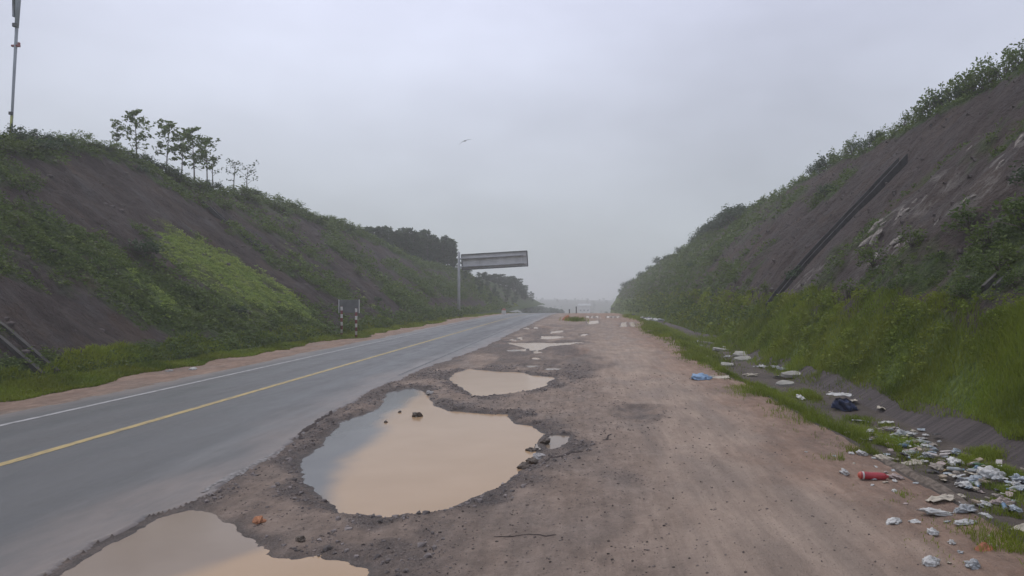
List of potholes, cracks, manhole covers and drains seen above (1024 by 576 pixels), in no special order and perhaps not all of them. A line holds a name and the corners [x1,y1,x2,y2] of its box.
pothole [445,367,559,396]
pothole [292,385,552,519]
pothole [504,341,590,352]
pothole [43,503,401,576]
pothole [535,433,575,450]
